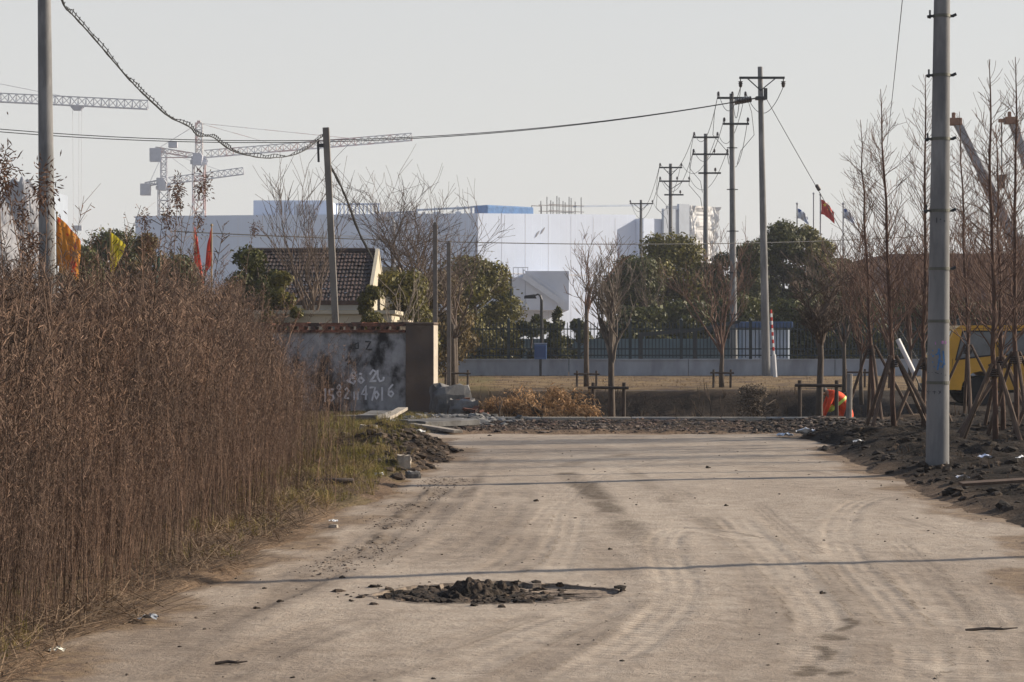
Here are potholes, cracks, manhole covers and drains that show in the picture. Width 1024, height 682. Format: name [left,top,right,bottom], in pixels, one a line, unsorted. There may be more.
pothole [367,580,625,605]
